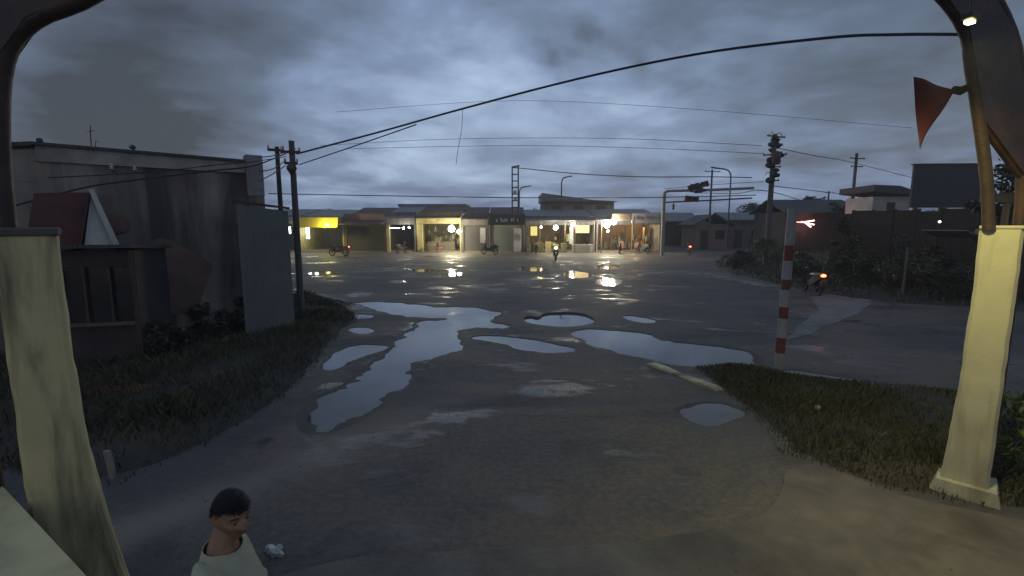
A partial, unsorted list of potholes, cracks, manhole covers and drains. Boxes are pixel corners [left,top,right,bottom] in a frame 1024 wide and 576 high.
pothole [674,401,751,427]
pothole [523,312,595,327]
